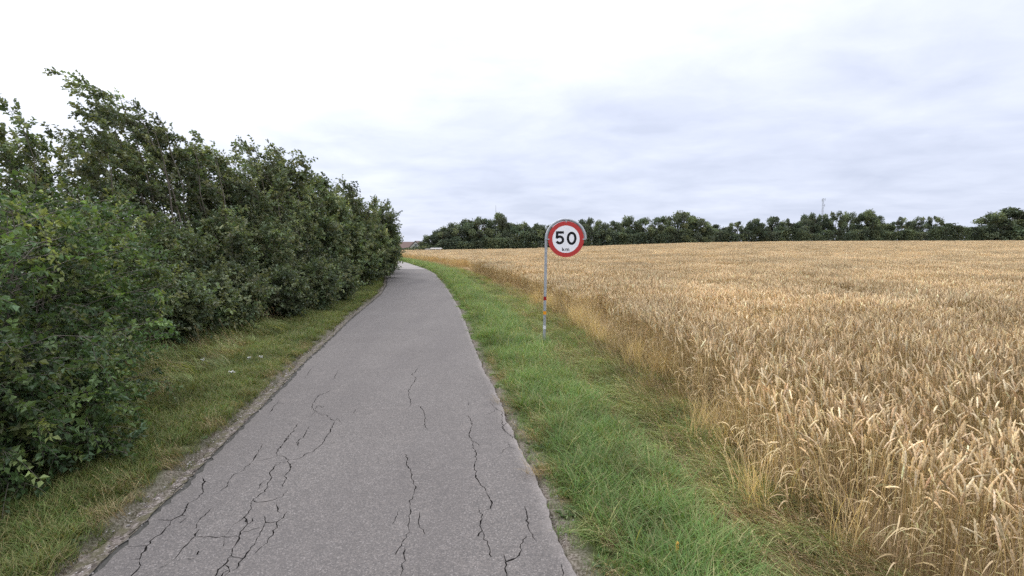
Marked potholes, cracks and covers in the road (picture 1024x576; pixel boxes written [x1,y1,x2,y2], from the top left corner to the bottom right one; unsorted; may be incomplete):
crack [89,276,388,576]
crack [393,454,425,576]
crack [468,402,537,576]
